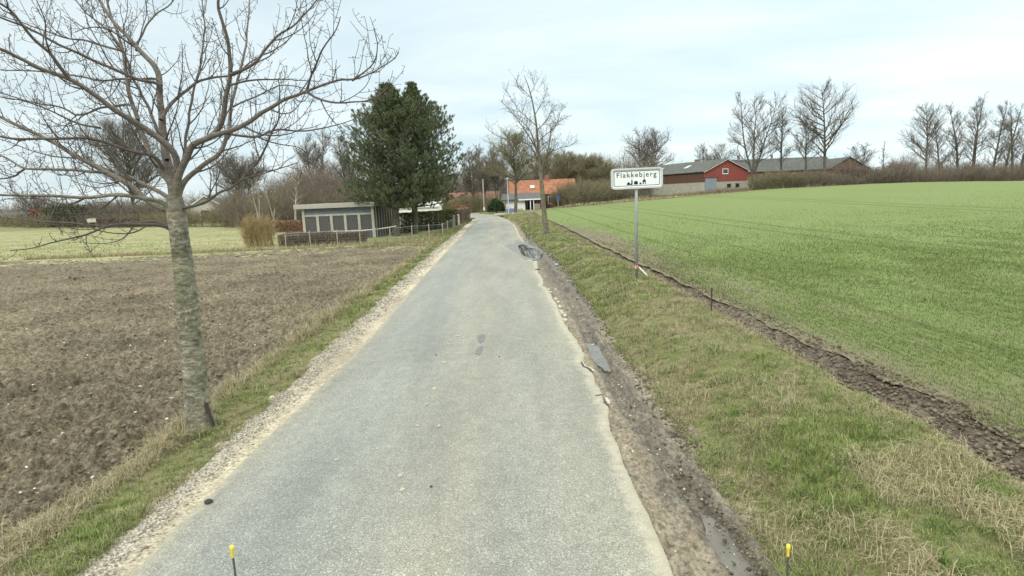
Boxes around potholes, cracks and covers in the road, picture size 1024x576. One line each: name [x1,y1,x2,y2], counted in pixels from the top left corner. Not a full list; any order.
pothole [505,240,542,261]
